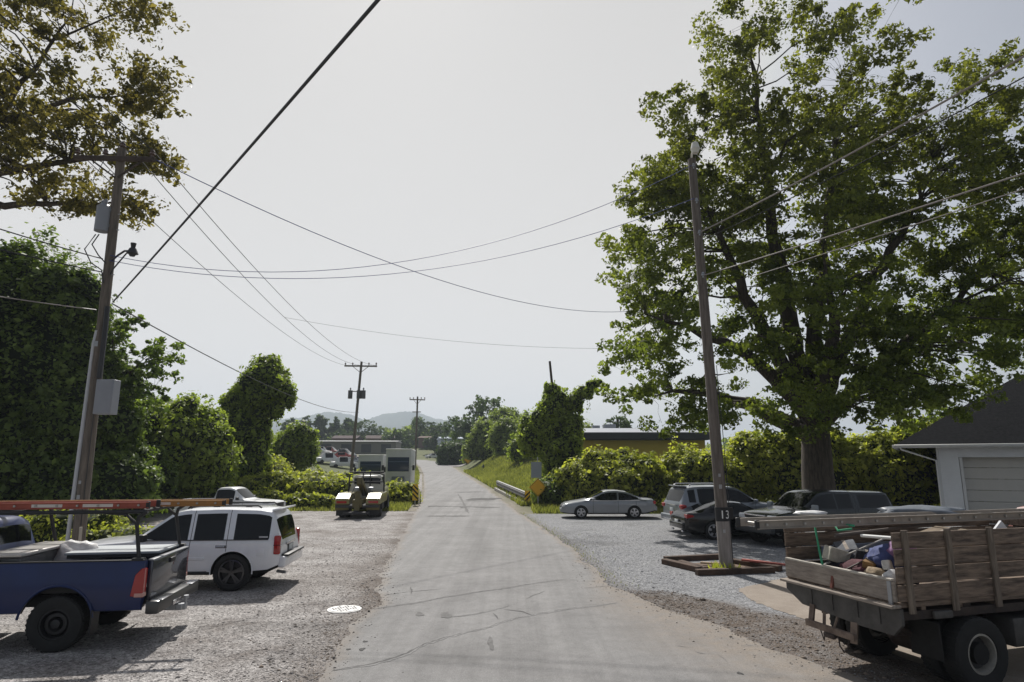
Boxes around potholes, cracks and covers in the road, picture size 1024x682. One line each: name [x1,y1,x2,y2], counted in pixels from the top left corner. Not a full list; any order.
manhole cover [327,605,362,614]
crack [335,579,613,670]
